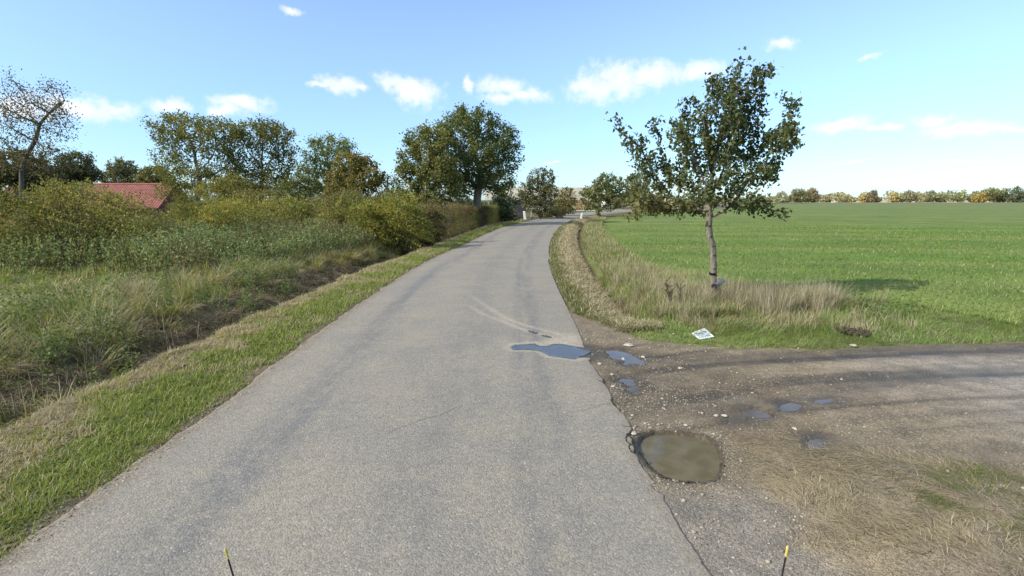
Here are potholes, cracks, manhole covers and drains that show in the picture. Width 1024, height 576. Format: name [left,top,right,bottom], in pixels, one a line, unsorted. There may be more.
crack [622,425,636,453]
pothole [634,430,726,484]
